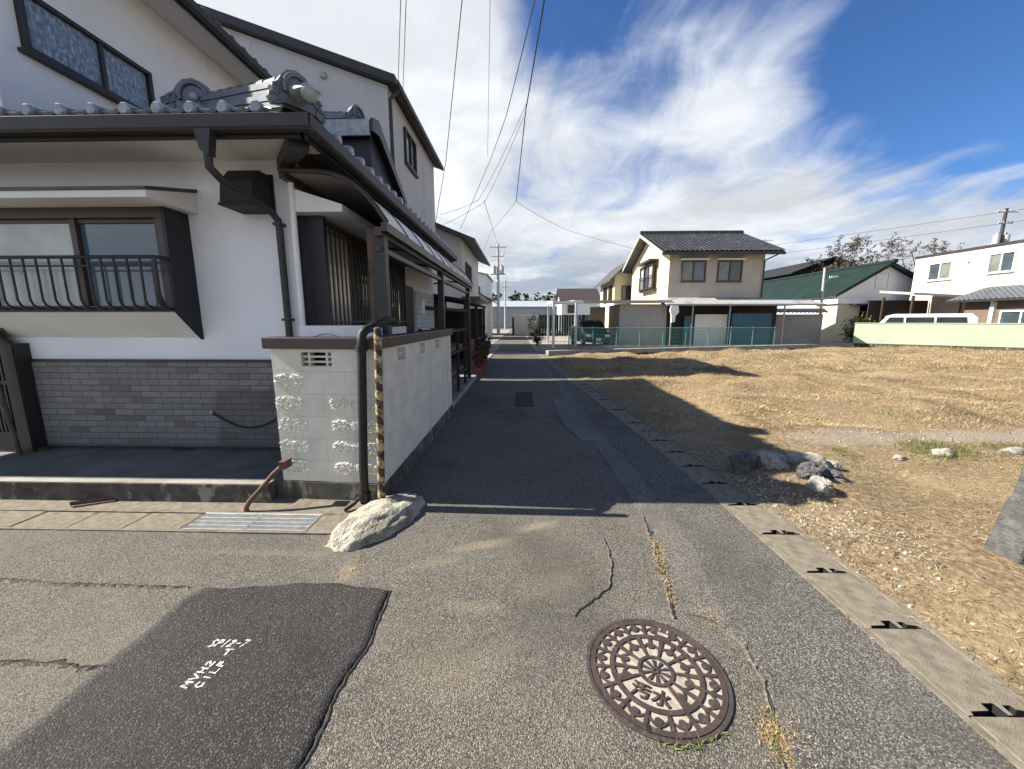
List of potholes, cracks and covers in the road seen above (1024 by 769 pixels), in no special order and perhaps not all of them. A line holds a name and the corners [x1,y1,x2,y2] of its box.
manhole cover [586,618,734,746]
crack [0,578,189,589]
crack [575,535,614,617]
crack [0,658,105,673]
drain grate [181,512,324,531]
